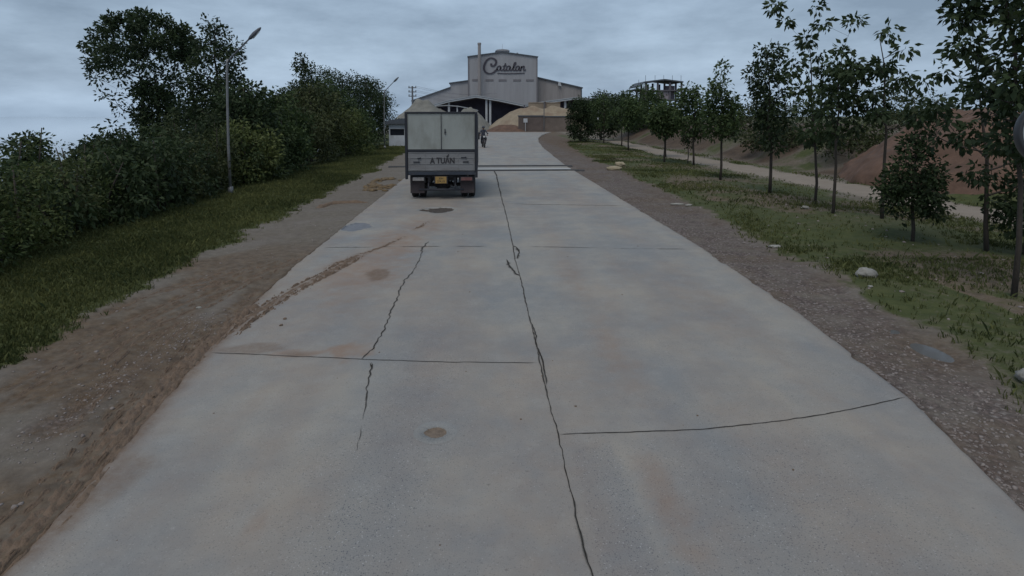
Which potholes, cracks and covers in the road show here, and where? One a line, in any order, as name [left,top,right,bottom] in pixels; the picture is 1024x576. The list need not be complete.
crack [494,171,594,576]
crack [355,241,429,452]
